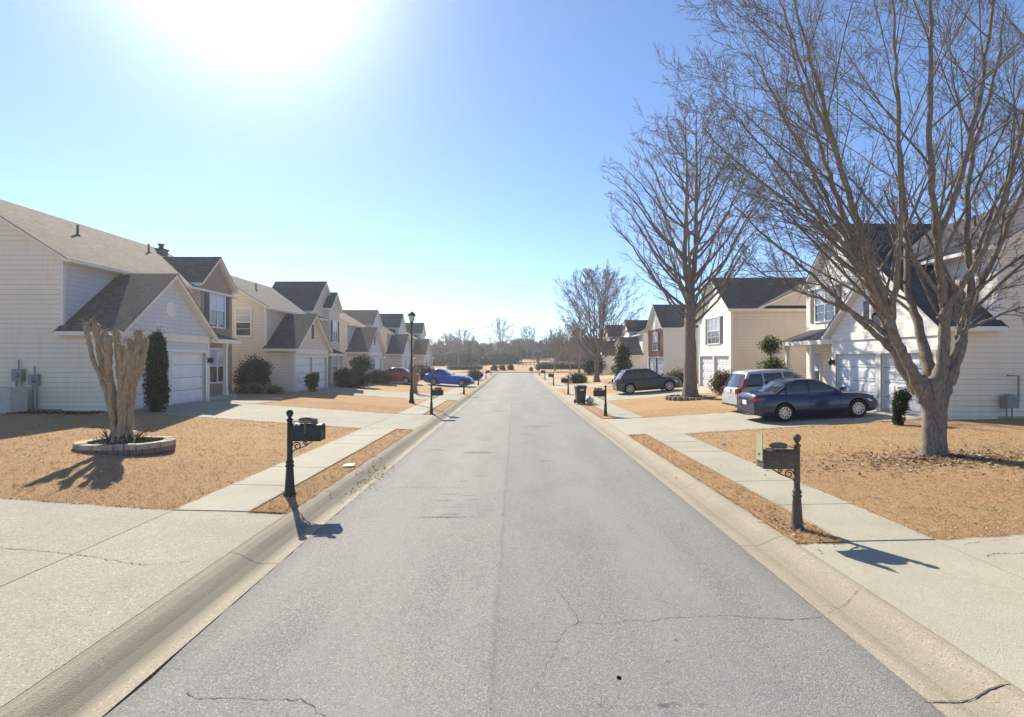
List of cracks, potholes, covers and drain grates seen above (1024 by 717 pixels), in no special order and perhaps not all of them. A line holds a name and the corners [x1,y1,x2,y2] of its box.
crack [923,684,1003,702]
crack [187,691,326,716]
crack [2,547,197,565]
crack [528,587,857,696]
